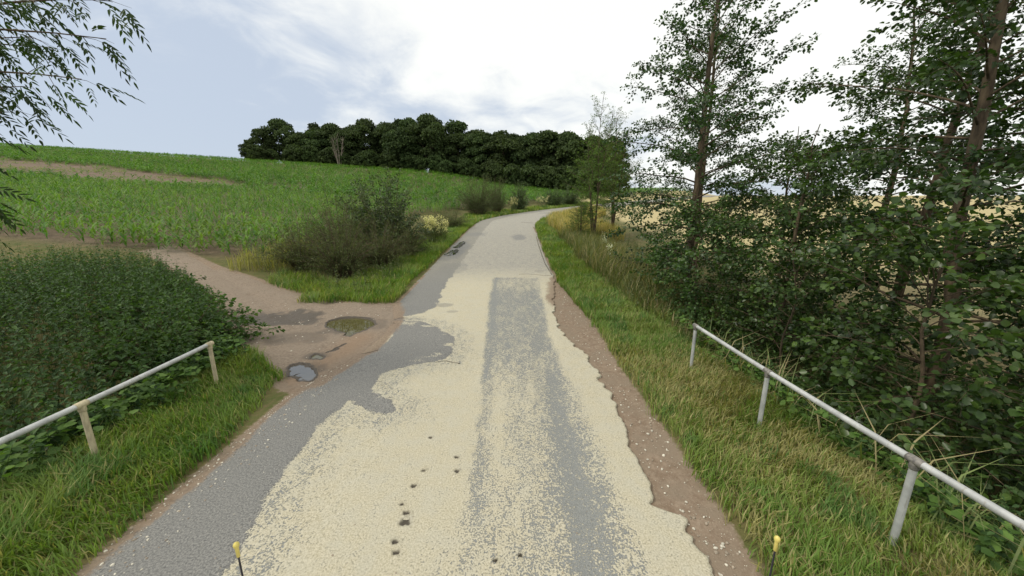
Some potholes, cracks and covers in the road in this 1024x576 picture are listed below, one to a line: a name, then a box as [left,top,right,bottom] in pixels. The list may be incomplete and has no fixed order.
pothole [324,316,378,337]
pothole [395,514,415,529]
pothole [388,548,404,559]
pothole [398,509,414,520]
pothole [285,362,319,382]
pothole [388,536,403,548]
